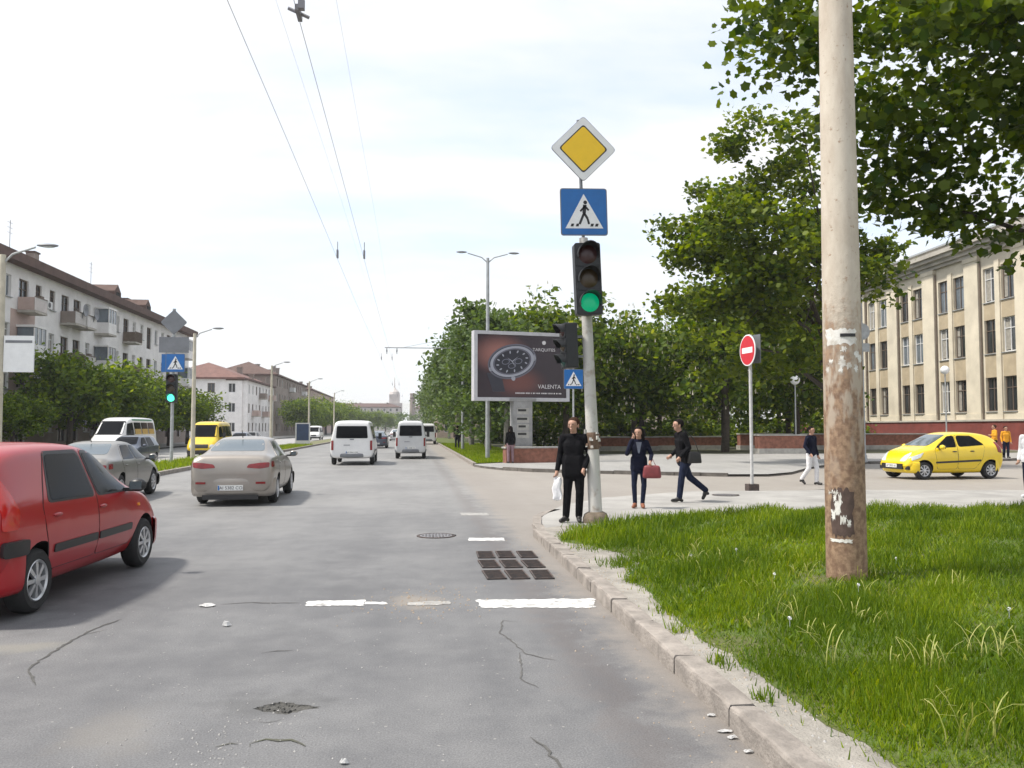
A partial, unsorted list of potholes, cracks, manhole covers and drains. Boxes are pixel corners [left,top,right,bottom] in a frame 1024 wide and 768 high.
drain grate [504,569,530,579]
drain grate [482,570,507,580]
pothole [254,702,317,715]
drain grate [478,559,501,568]
drain grate [521,559,546,568]
crack [215,720,306,747]
drain grate [495,550,516,558]
drain grate [499,559,523,568]
drain grate [529,569,555,579]
crack [531,737,563,768]
drain grate [516,550,538,558]
crack [28,619,120,685]
